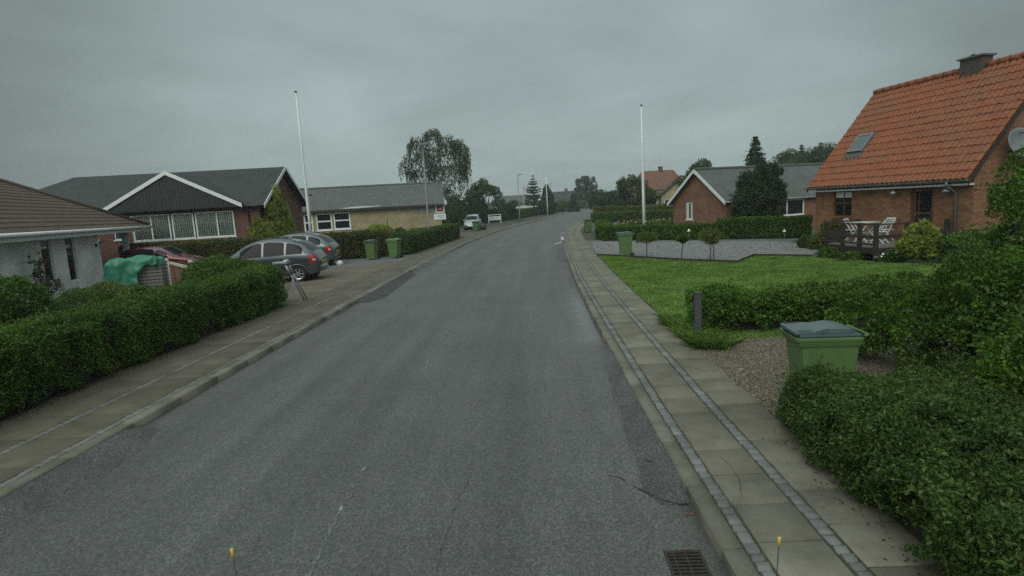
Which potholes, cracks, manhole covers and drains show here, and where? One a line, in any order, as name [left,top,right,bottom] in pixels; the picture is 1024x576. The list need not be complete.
drain grate [663,550,712,576]
